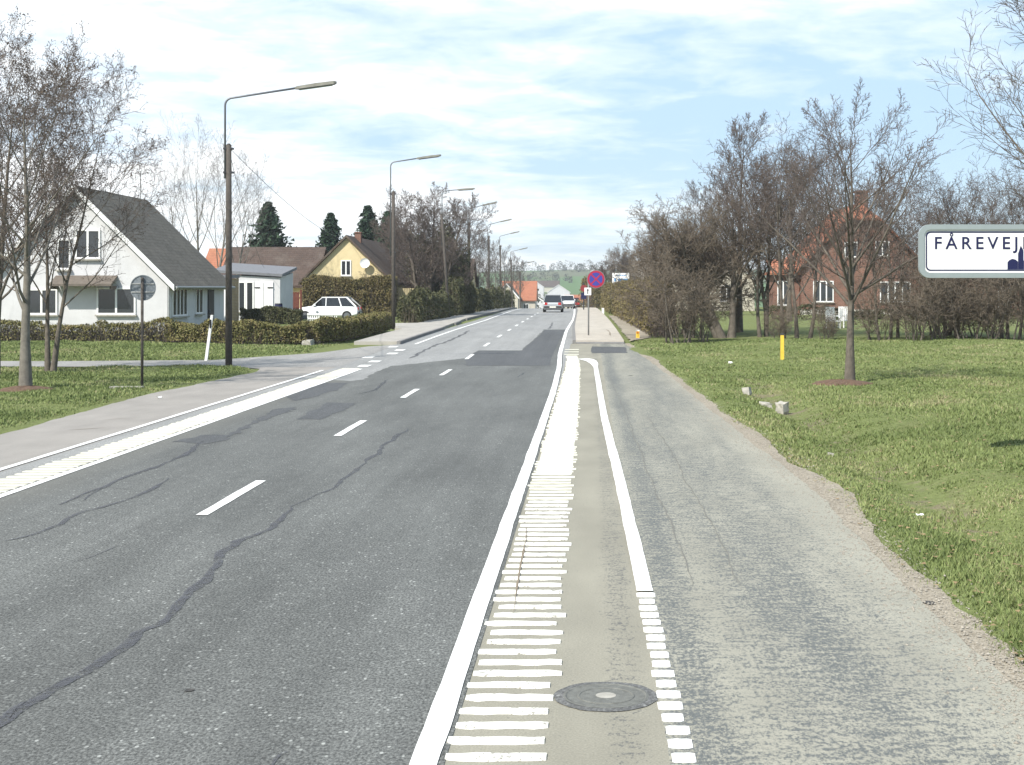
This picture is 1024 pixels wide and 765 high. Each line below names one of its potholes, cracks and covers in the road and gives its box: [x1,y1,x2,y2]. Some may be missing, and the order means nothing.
crack [0,429,408,727]
manhole cover [553,682,658,712]
